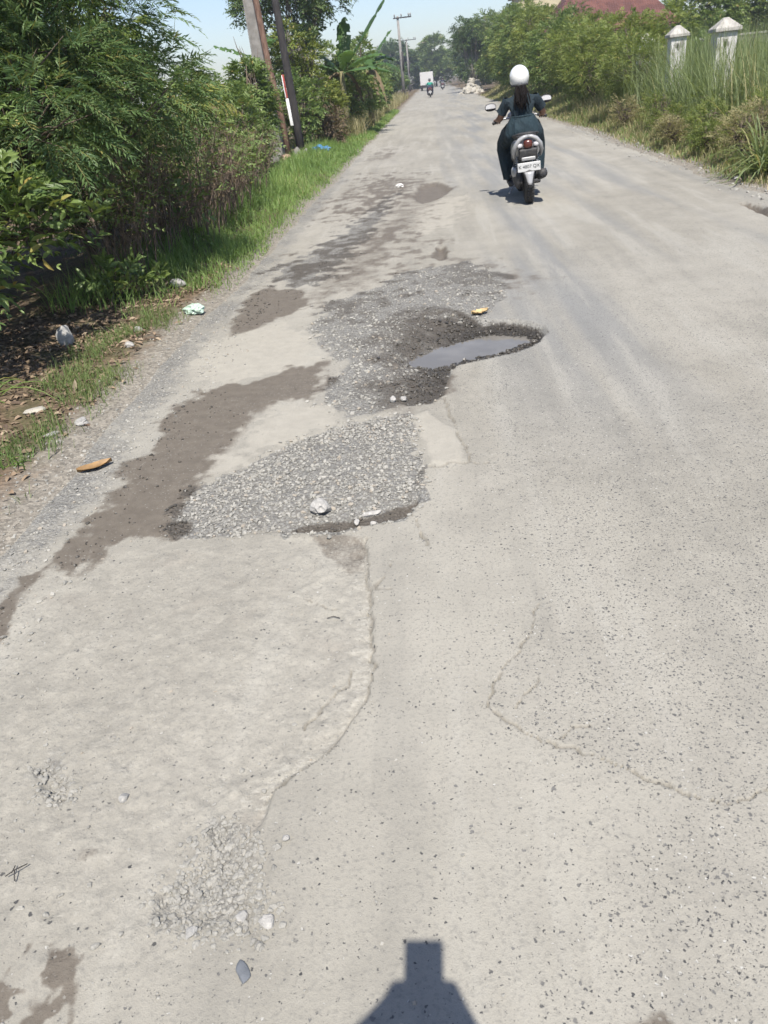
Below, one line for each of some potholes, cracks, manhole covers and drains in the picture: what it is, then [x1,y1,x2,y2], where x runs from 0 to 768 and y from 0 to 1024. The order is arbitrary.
pothole [377,306,551,408]
pothole [161,412,431,541]
pothole [138,812,285,950]
crack [262,514,432,806]
crack [486,603,768,809]
